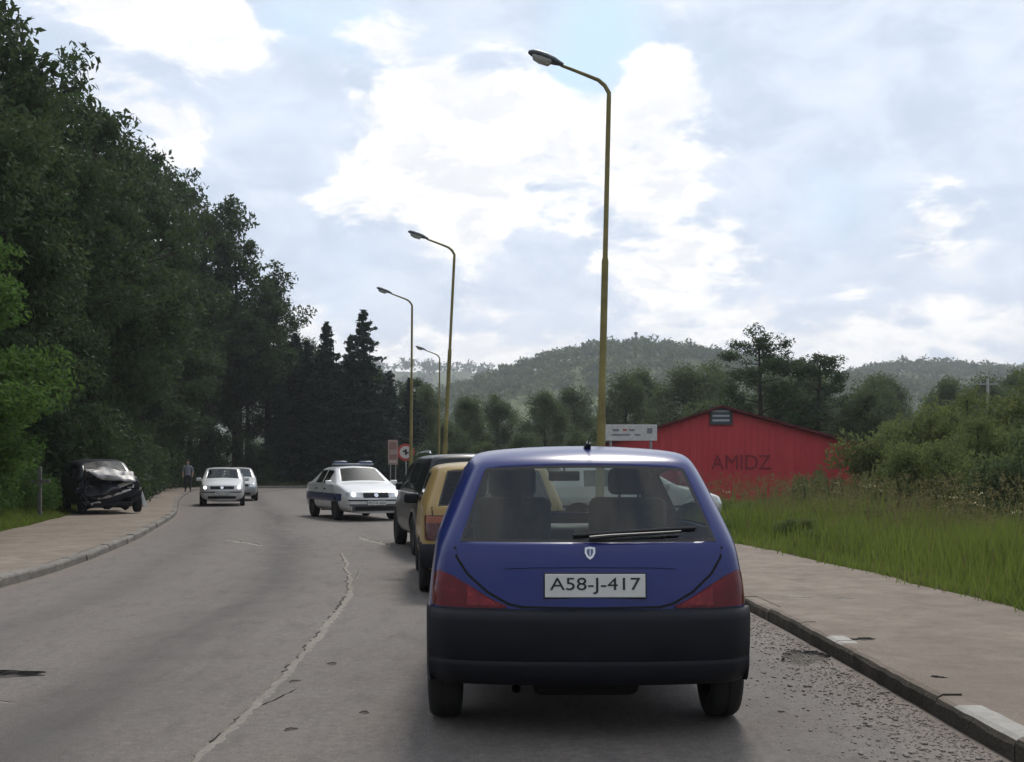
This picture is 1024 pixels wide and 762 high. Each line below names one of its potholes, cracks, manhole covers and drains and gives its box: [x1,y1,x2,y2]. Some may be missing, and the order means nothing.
crack [190,536,392,762]
pothole [781,649,829,666]
